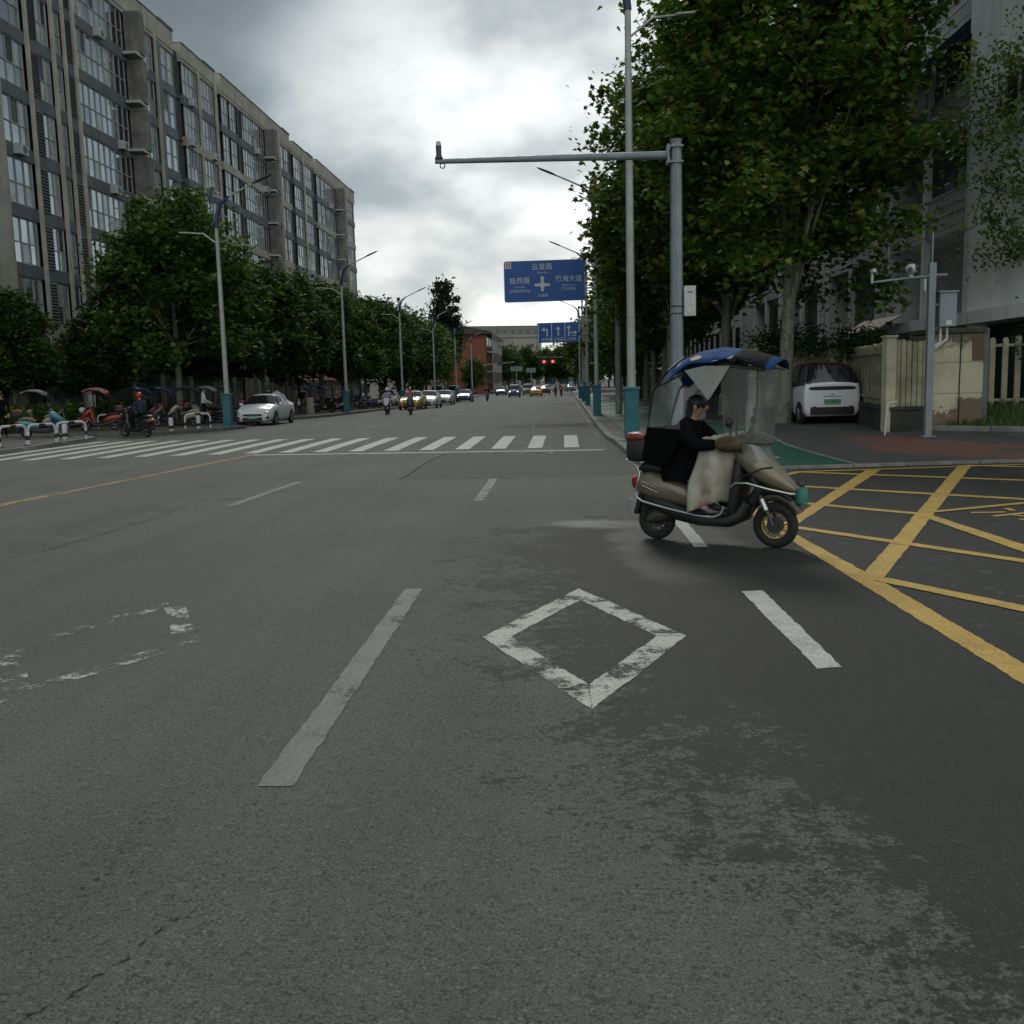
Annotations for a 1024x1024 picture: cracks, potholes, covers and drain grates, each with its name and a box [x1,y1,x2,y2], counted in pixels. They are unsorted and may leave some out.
crack [20,916,179,1021]
